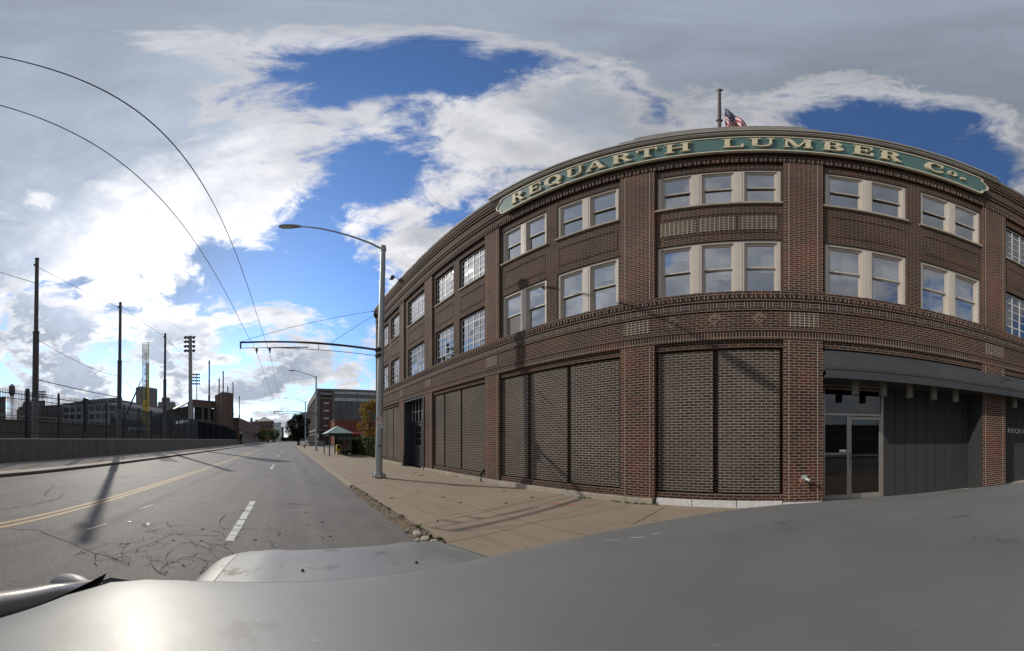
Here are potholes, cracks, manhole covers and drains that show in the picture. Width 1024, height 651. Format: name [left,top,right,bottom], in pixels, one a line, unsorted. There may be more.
crack [13,510,248,575]
